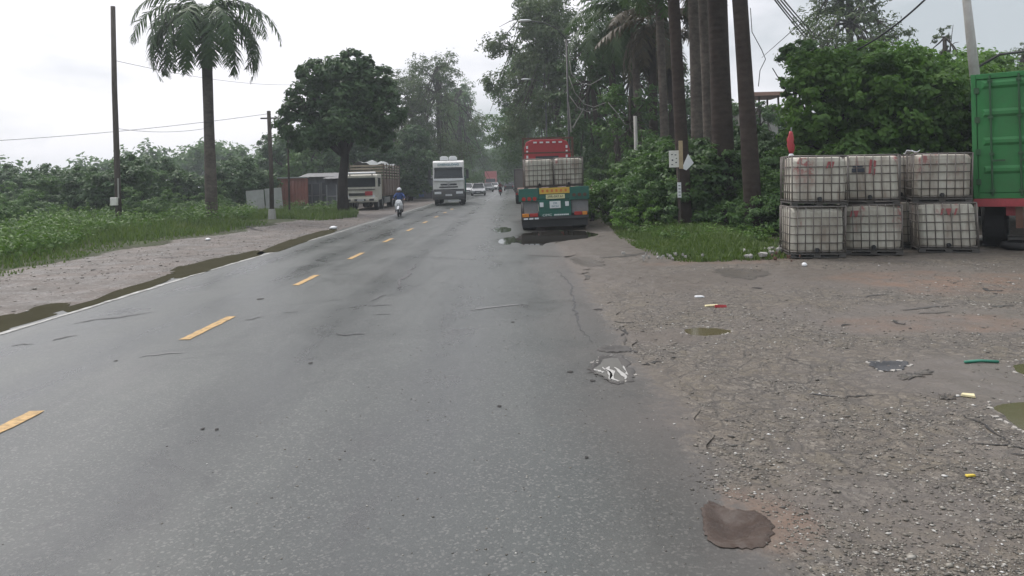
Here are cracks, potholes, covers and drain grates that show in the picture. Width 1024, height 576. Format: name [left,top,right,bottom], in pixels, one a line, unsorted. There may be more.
pothole [680,325,733,336]
pothole [865,360,913,372]
pothole [587,354,637,384]
crack [53,312,149,340]
crack [369,264,416,315]
